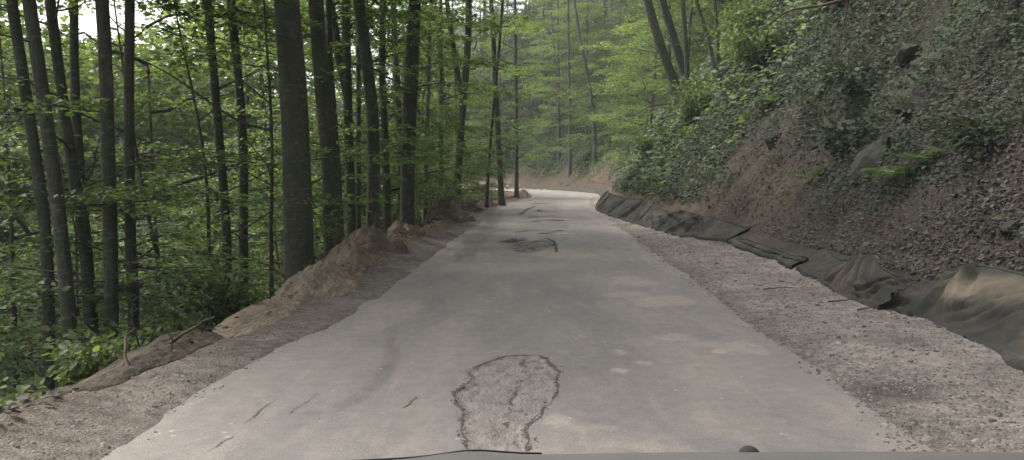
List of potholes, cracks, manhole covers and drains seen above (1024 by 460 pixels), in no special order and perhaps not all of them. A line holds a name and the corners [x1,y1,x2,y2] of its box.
crack [498,203,564,252]
pothole [456,356,557,452]
pothole [508,238,555,252]
crack [213,392,318,448]
